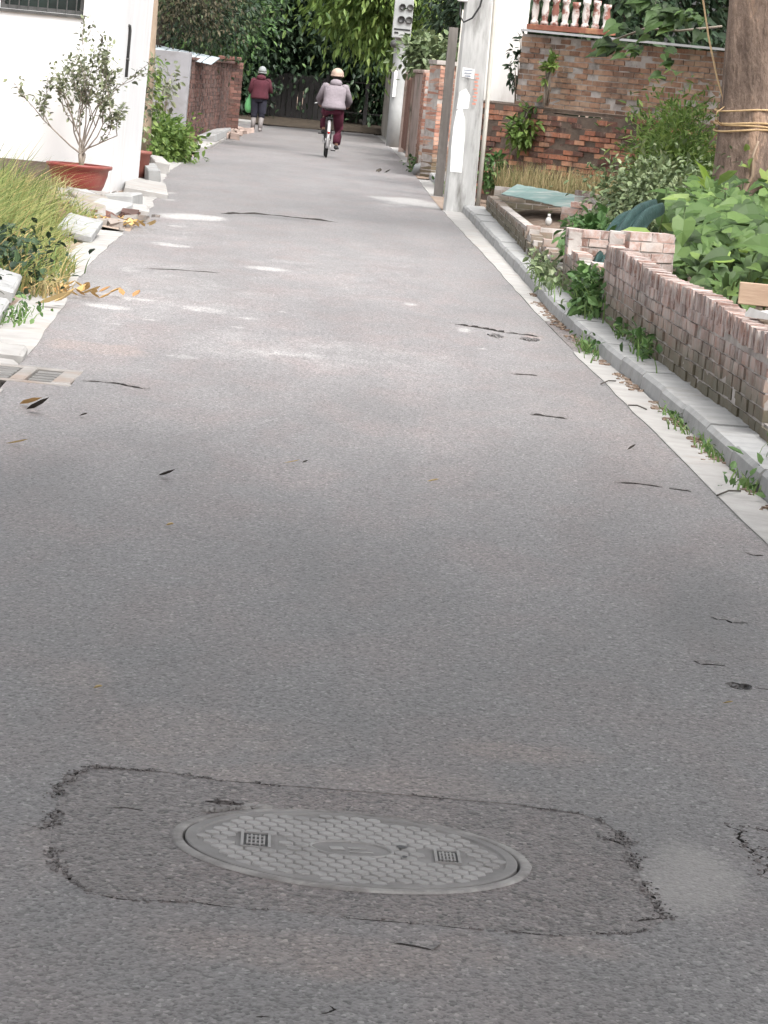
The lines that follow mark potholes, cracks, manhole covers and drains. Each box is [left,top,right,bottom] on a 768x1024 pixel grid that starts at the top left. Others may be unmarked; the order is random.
crack [456,324,540,337]
crack [615,480,693,492]
crack [724,822,768,879]
drain grate [0,363,84,388]
manhole cover [171,809,532,894]
crack [82,379,150,389]
